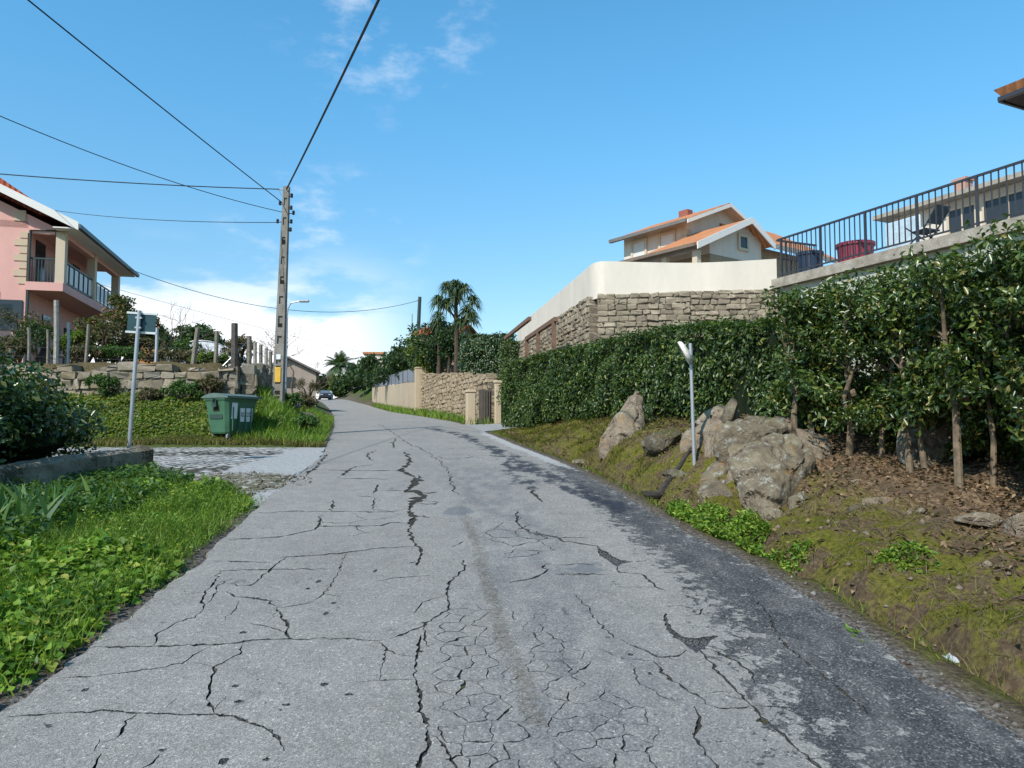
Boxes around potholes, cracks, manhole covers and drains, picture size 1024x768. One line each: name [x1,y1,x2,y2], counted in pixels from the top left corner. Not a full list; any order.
crack [11,438,873,768]
